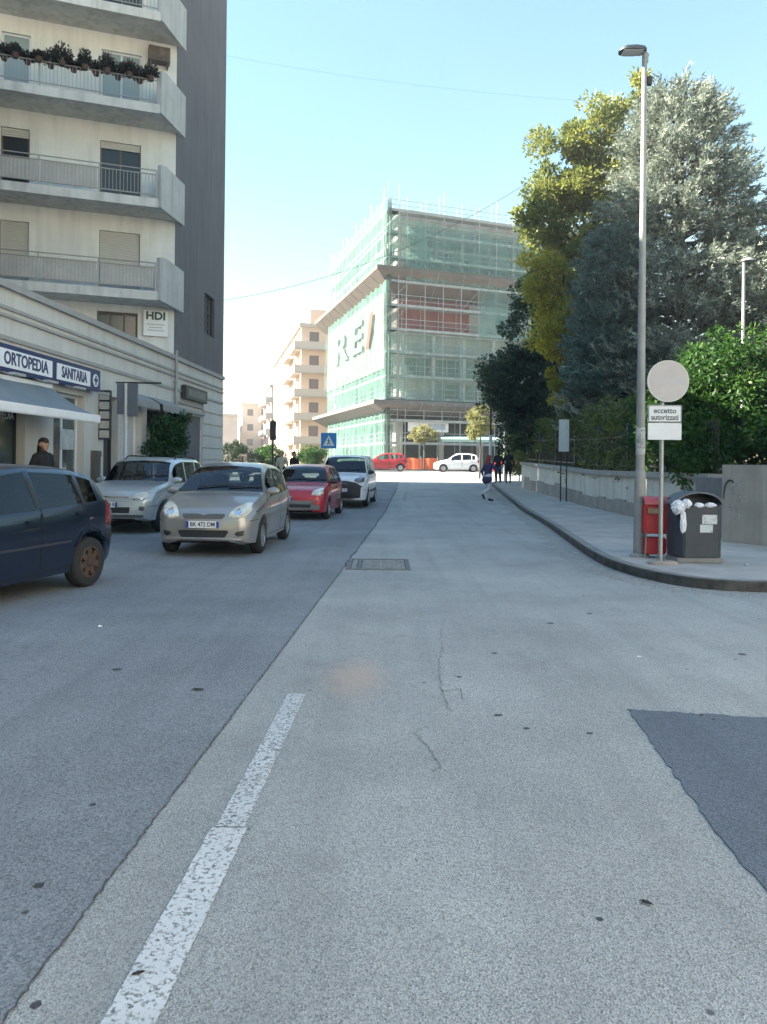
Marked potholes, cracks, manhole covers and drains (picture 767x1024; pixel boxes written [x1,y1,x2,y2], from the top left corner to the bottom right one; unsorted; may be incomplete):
manhole cover [345,558,411,570]
crack [414,727,446,772]
crack [438,621,463,711]
